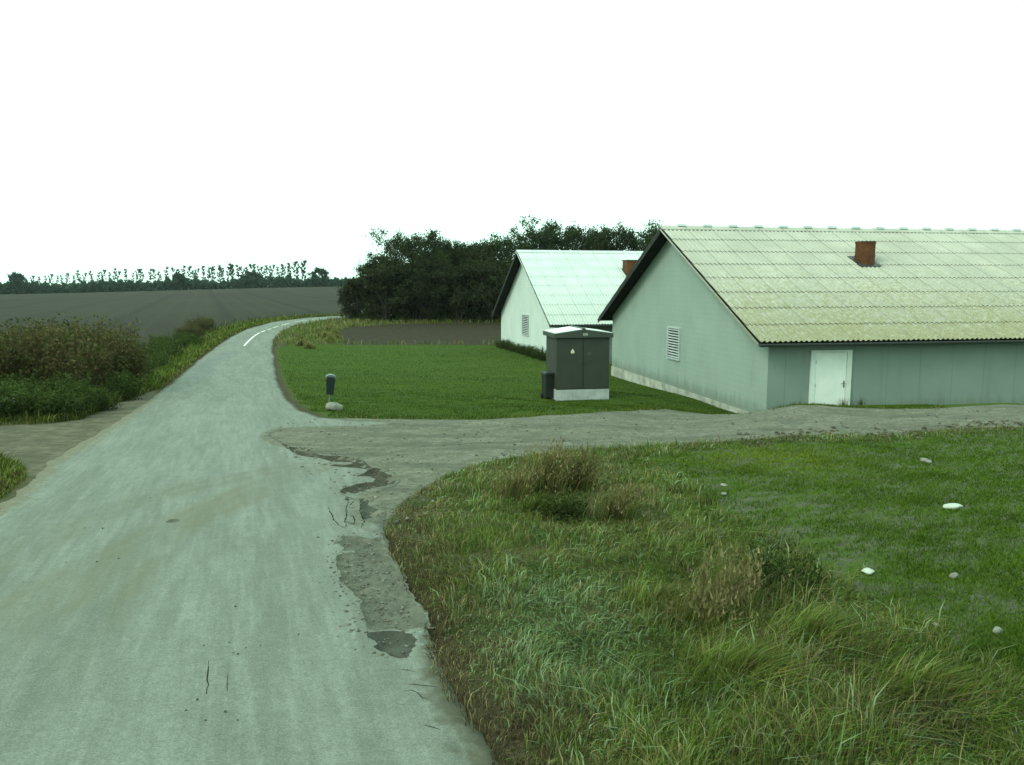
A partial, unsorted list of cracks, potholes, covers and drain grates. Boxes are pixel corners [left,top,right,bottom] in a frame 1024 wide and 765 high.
pothole [340,468,396,494]
pothole [335,536,435,630]
pothole [367,630,417,658]
crack [402,669,436,699]
crack [328,483,365,528]
